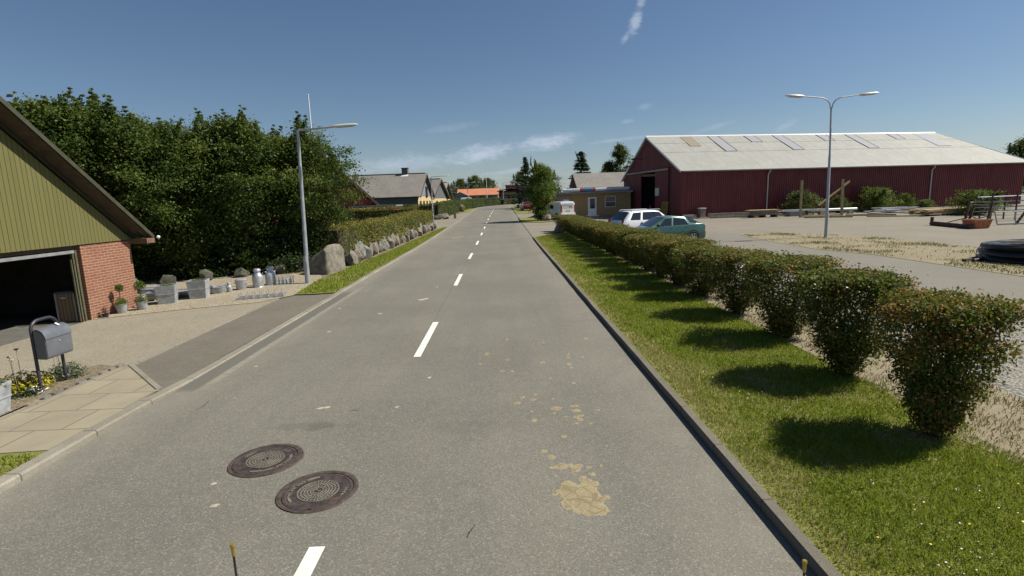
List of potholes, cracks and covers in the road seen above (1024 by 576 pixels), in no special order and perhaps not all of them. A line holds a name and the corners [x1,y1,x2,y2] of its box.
manhole cover [227,444,304,478]
manhole cover [275,470,359,514]
